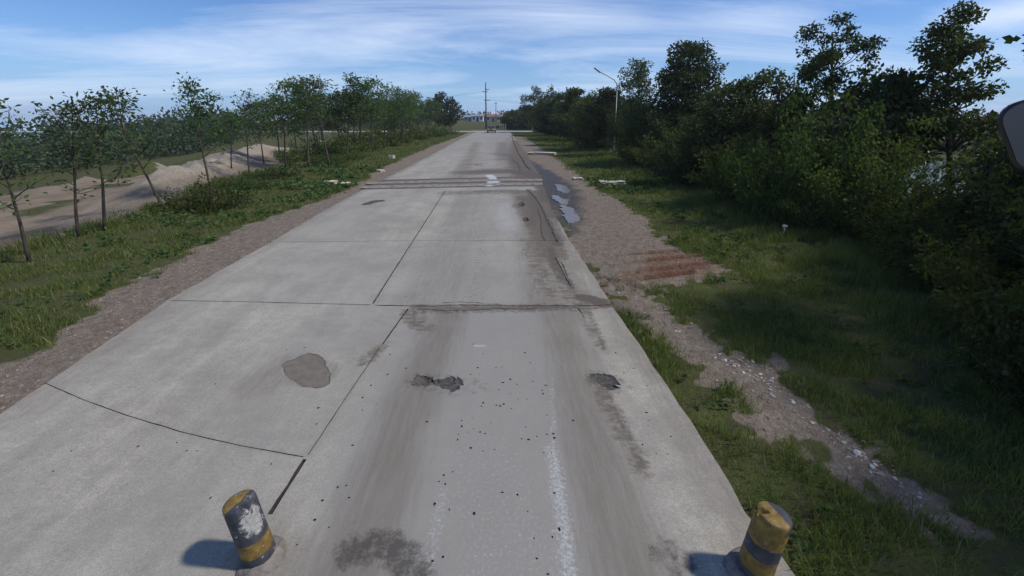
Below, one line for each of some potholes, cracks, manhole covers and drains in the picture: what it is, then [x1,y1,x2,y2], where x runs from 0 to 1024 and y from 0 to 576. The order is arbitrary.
pothole [589,373,620,391]
pothole [408,375,464,393]
crack [528,191,571,286]
